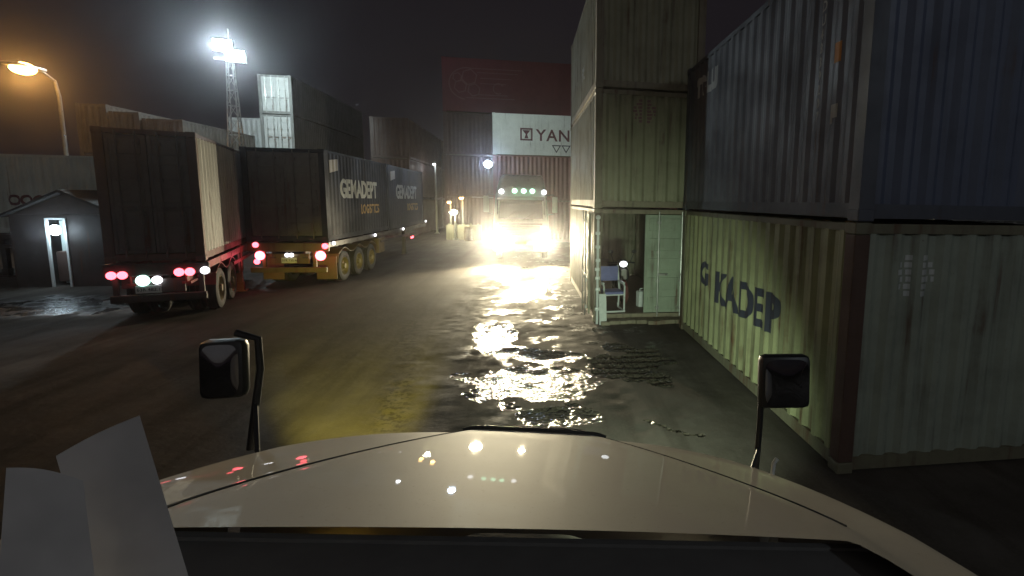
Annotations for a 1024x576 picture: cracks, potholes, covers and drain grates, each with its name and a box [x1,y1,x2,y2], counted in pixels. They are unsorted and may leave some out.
pothole [482,345,588,365]
pothole [514,406,603,427]
pothole [586,343,679,387]
crack [643,419,706,437]
